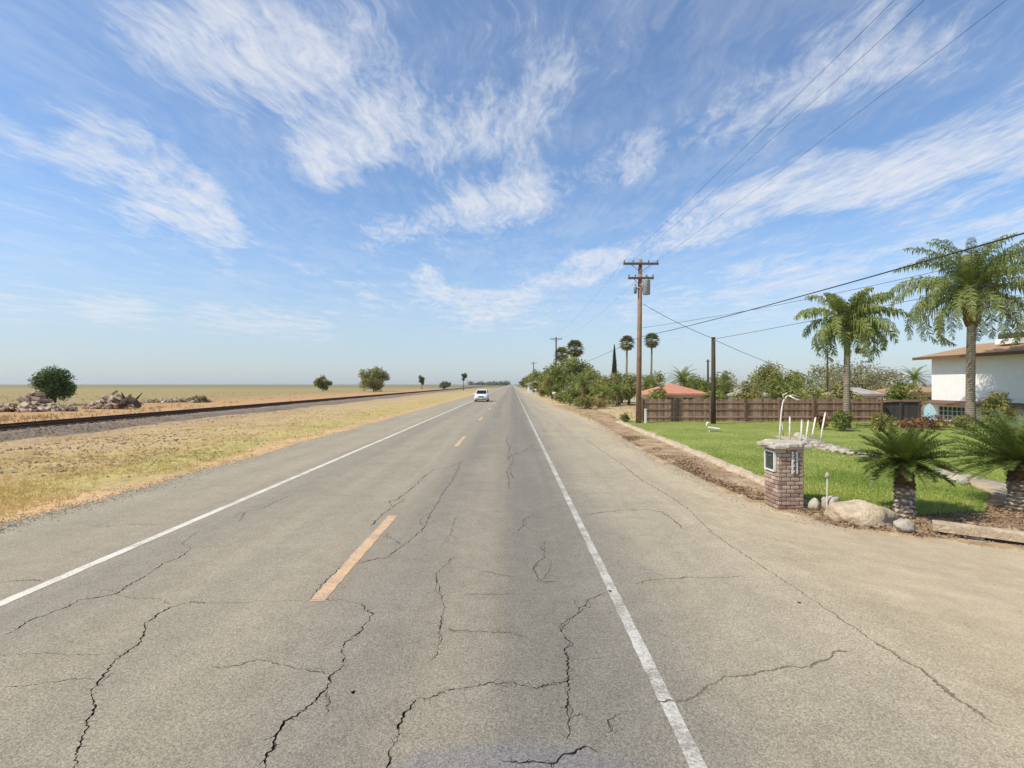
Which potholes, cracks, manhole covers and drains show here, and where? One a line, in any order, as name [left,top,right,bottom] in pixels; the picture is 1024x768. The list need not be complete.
crack [4,461,522,768]
crack [386,592,635,768]
crack [579,440,993,722]
crack [517,516,552,583]
